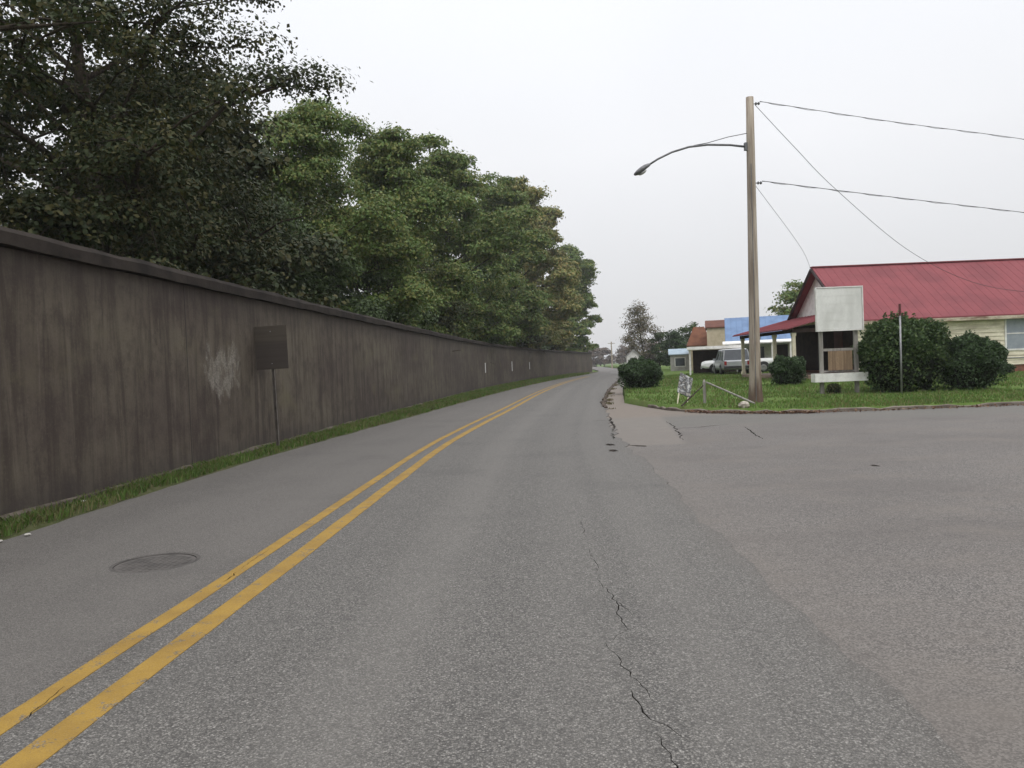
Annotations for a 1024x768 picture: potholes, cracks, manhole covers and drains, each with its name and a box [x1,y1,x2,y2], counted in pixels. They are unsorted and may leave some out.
crack [582,527,680,768]
manhole cover [109,553,200,573]
